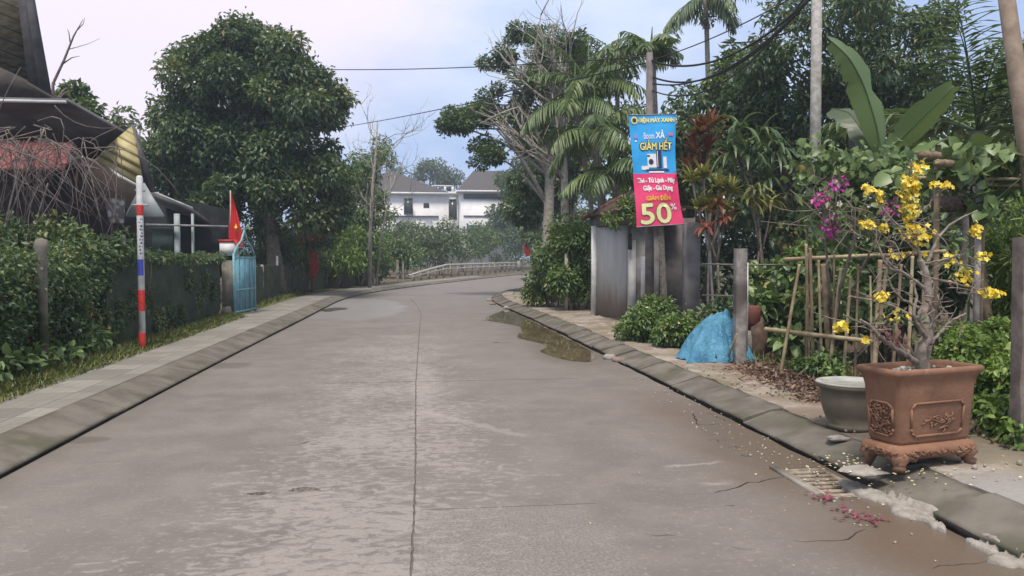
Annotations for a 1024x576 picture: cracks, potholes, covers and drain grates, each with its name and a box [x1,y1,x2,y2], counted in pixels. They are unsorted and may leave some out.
crack [715,477,781,506]
drain grate [782,468,858,498]
